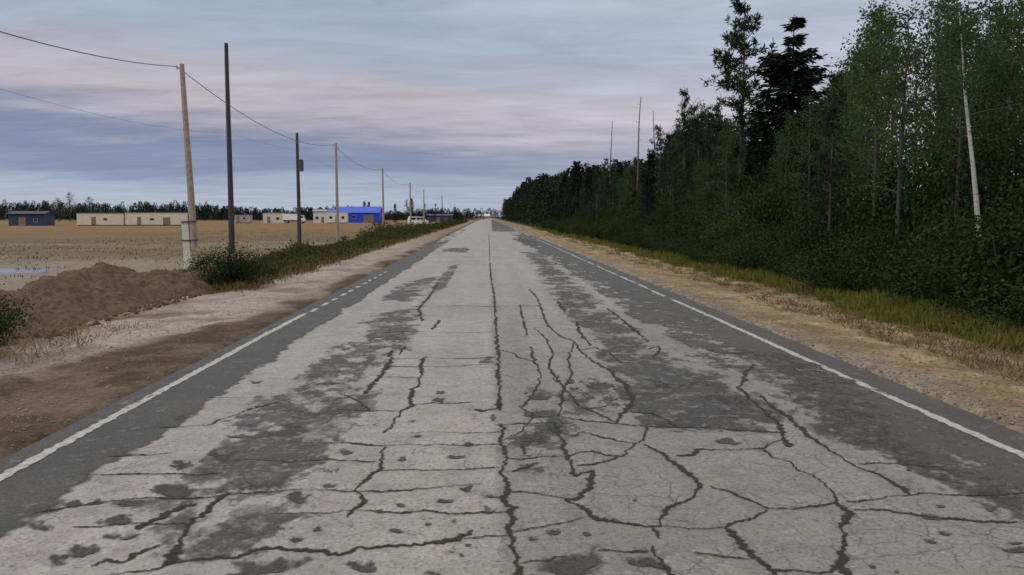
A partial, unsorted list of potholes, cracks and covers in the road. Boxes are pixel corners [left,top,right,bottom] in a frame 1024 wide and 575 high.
crack [35,283,1024,575]
